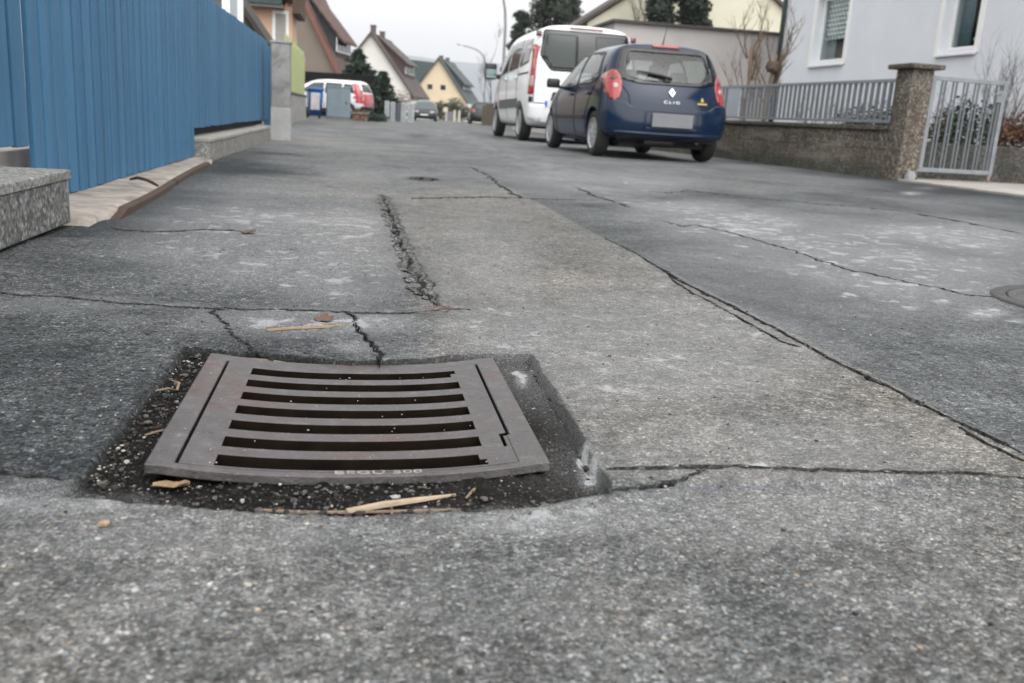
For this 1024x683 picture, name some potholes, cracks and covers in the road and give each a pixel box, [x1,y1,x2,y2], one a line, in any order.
crack [469,167,522,198]
crack [575,187,628,207]
drain grate [144,353,550,485]
manhole cover [990,285,1024,308]
crack [605,220,1024,491]
crack [208,309,274,361]
crack [345,312,383,367]
